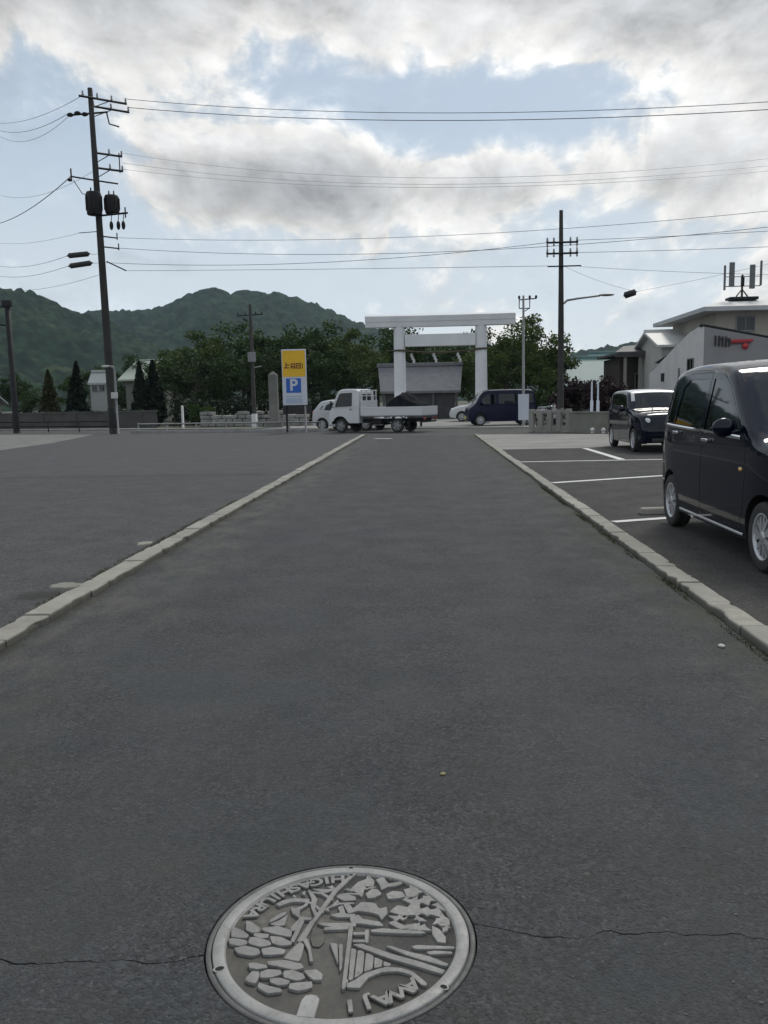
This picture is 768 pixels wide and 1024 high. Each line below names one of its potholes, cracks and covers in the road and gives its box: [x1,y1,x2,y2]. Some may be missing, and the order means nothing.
manhole cover [206,865,476,1024]
